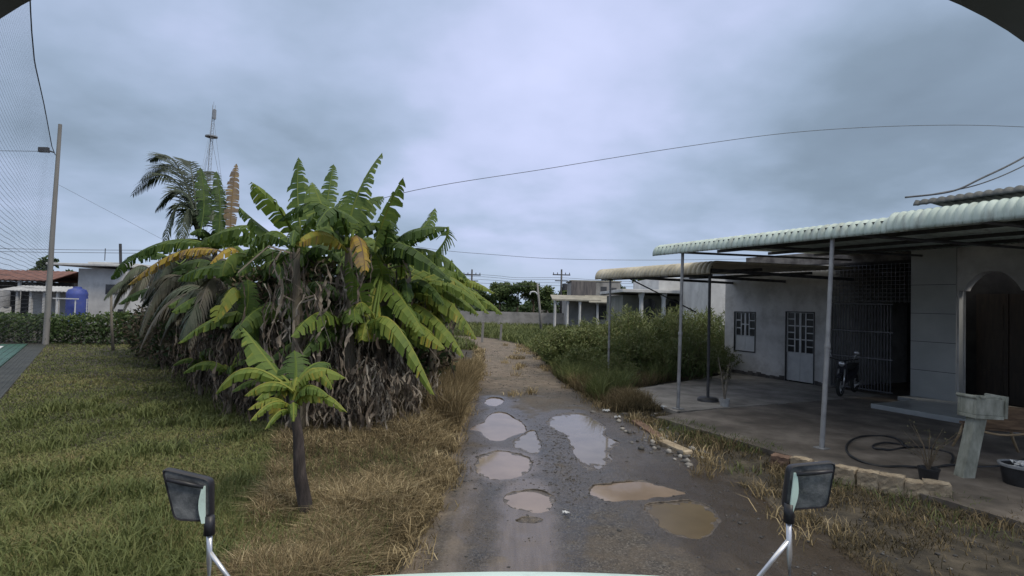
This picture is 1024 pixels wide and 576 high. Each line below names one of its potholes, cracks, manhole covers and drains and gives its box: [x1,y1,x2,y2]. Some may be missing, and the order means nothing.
pothole [589,480,687,502]
pothole [546,413,621,472]
pothole [484,397,505,406]
pothole [515,516,543,524]
pothole [513,430,542,454]
pothole [474,450,534,480]
pothole [503,489,557,513]
pothole [470,411,527,441]
pothole [644,499,722,539]
